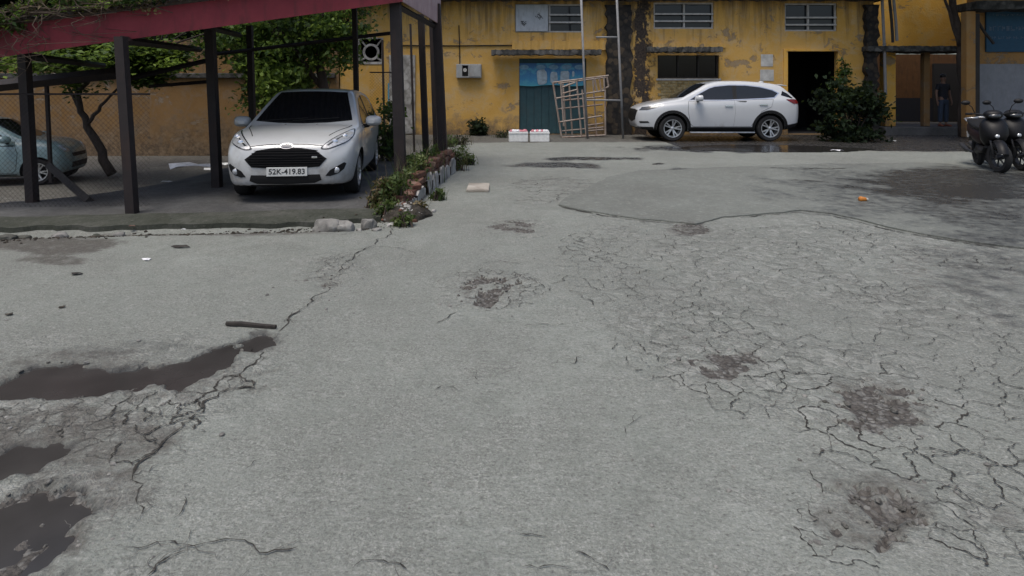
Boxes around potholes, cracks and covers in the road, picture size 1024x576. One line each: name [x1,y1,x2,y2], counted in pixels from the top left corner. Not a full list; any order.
pothole [658,338,791,398]
crack [522,550,620,572]
pothole [469,217,552,239]
crack [0,352,303,576]
pothole [433,268,541,318]
pothole [0,334,270,423]
pothole [0,455,164,576]
pothole [765,460,980,576]
crack [517,176,1024,568]
crack [308,246,415,278]
